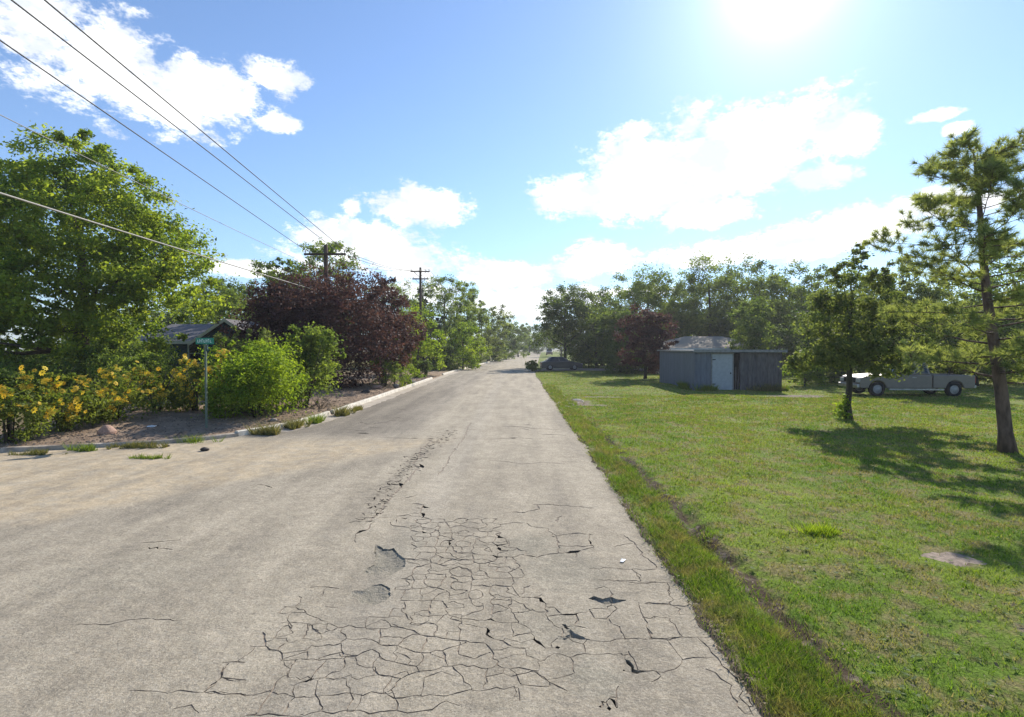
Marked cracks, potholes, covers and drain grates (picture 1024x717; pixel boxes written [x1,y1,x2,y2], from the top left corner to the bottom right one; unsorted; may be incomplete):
pothole [352,584,391,606]
pothole [363,544,406,576]
crack [131,504,754,717]
pothole [589,596,626,605]
